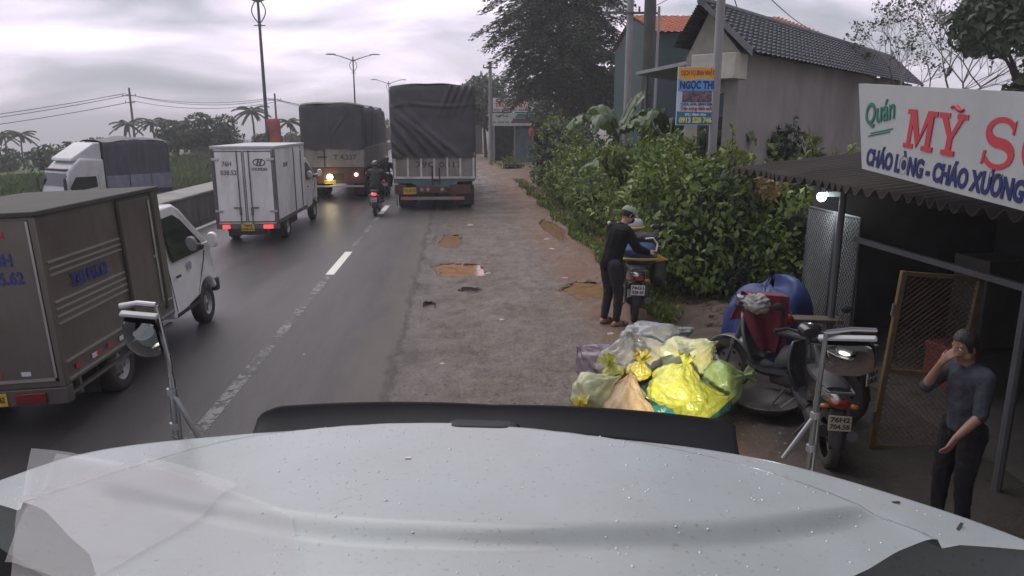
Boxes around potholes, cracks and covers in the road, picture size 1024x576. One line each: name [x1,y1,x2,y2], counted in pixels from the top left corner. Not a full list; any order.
pothole [555,279,603,301]
pothole [421,300,437,310]
pothole [431,233,464,249]
pothole [536,217,567,243]
pothole [427,262,493,279]
